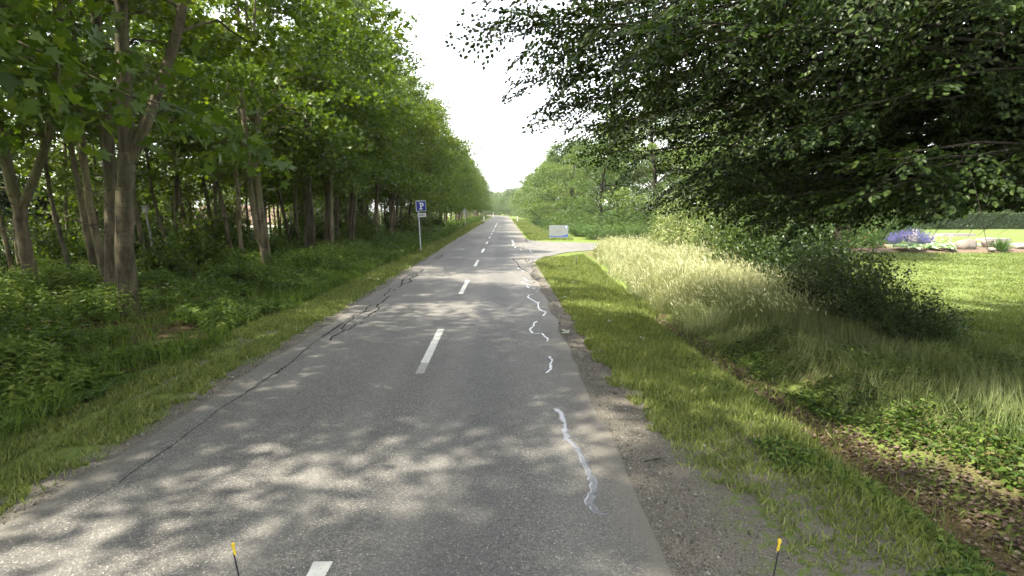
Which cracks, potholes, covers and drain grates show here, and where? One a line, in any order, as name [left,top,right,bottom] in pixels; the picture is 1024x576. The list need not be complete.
crack [86,255,443,503]
